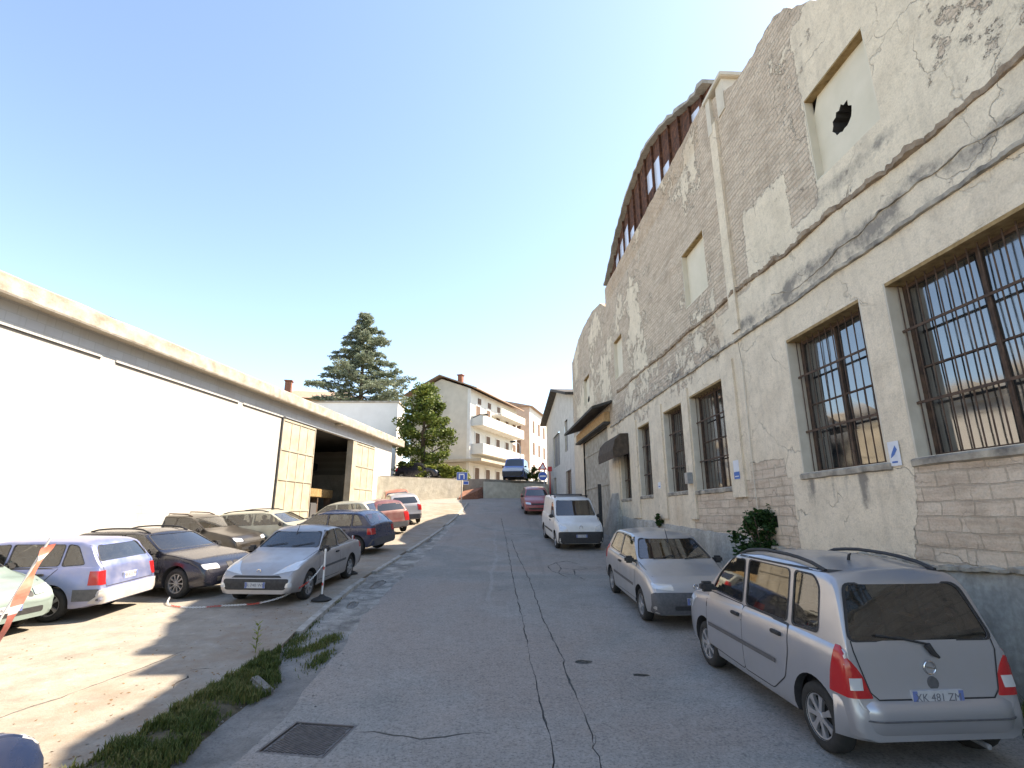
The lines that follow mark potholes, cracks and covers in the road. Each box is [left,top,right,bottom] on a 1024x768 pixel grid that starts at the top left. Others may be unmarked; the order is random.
crack [501,519,602,768]
crack [368,731,490,740]
